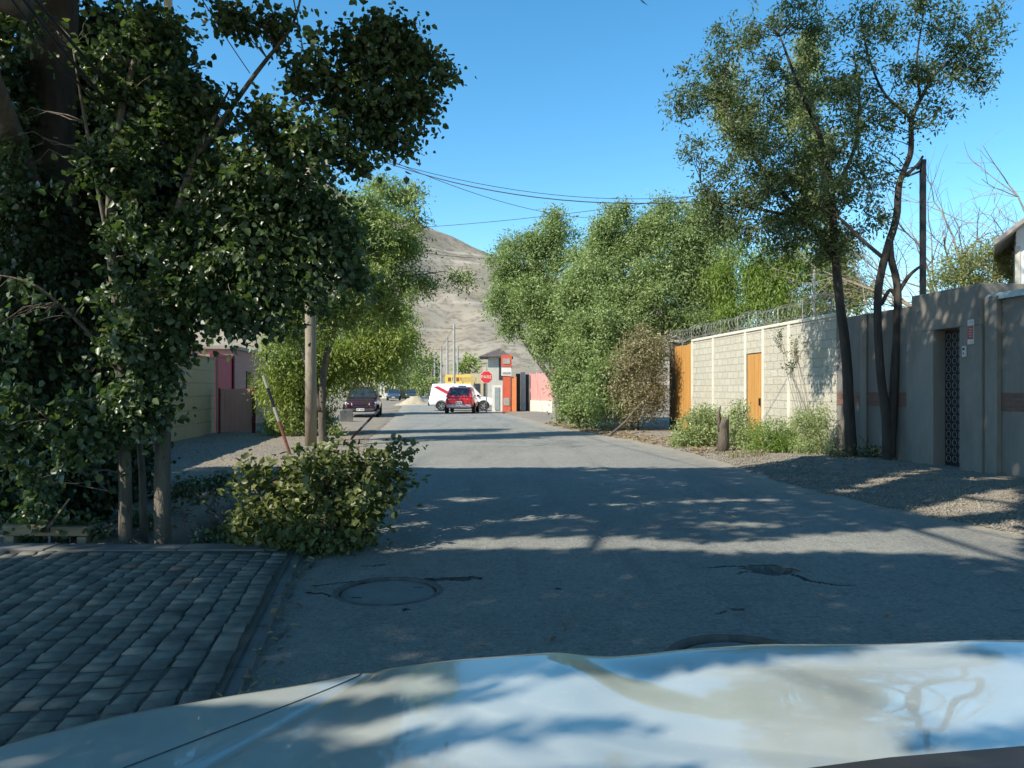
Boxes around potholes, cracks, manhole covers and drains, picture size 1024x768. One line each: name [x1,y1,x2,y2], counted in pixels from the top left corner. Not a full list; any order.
pothole [740,565,801,576]
manhole cover [331,577,443,610]
